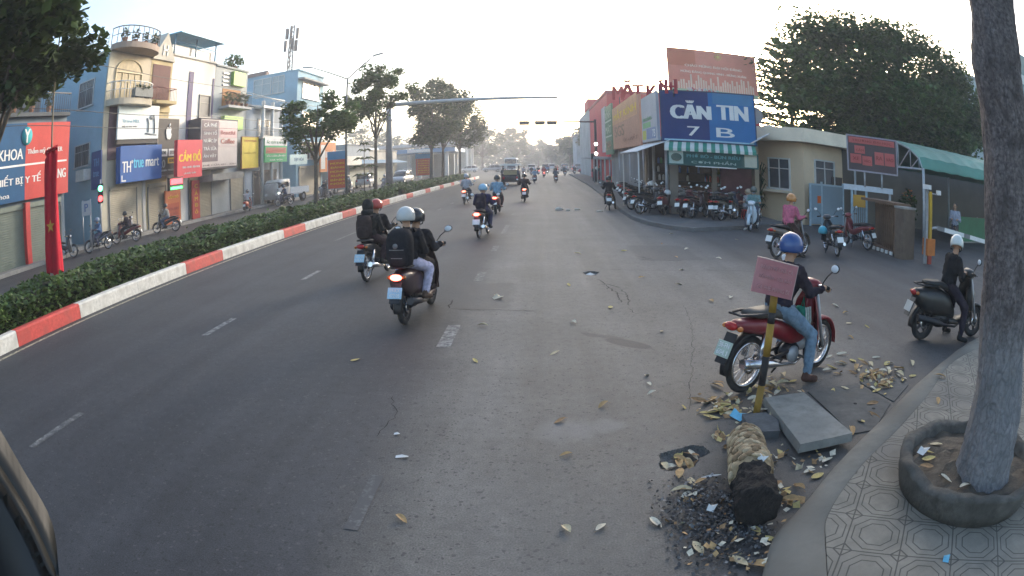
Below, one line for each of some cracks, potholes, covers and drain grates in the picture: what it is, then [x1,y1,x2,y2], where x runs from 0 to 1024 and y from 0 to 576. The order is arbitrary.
pothole [575,269,610,278]
crack [599,269,754,313]
